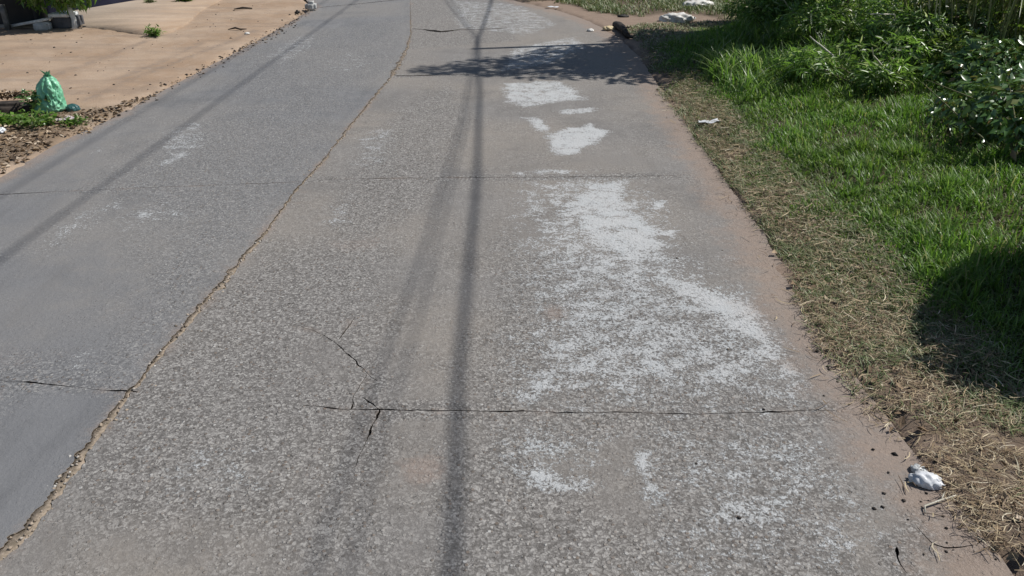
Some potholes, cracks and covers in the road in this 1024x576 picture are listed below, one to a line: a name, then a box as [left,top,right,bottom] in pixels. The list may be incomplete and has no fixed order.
crack [294,317,381,467]
